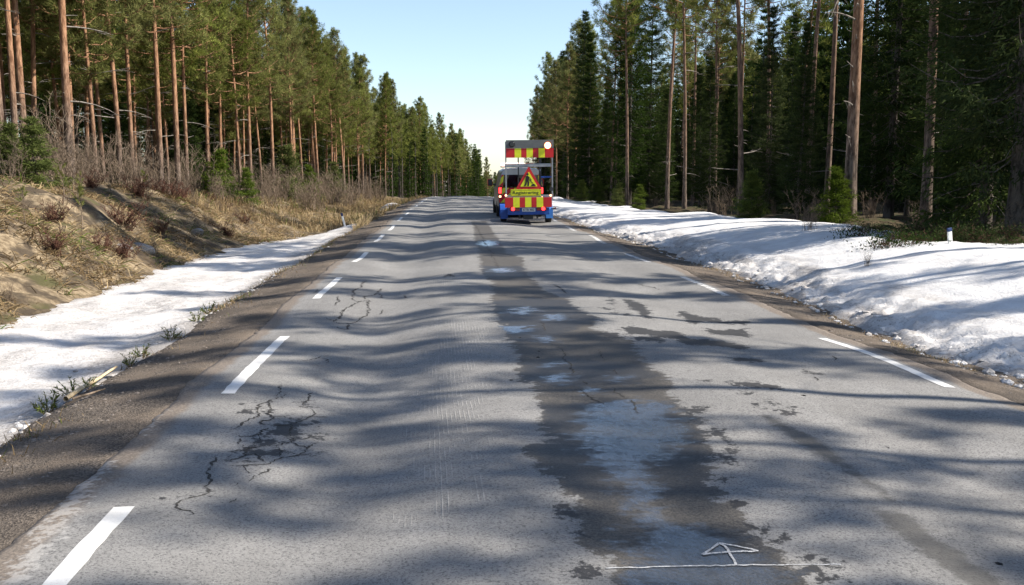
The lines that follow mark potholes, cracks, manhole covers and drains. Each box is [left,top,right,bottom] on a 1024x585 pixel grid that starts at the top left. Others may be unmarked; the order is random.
crack [314,281,383,329]
crack [558,346,638,413]
crack [174,386,325,515]
